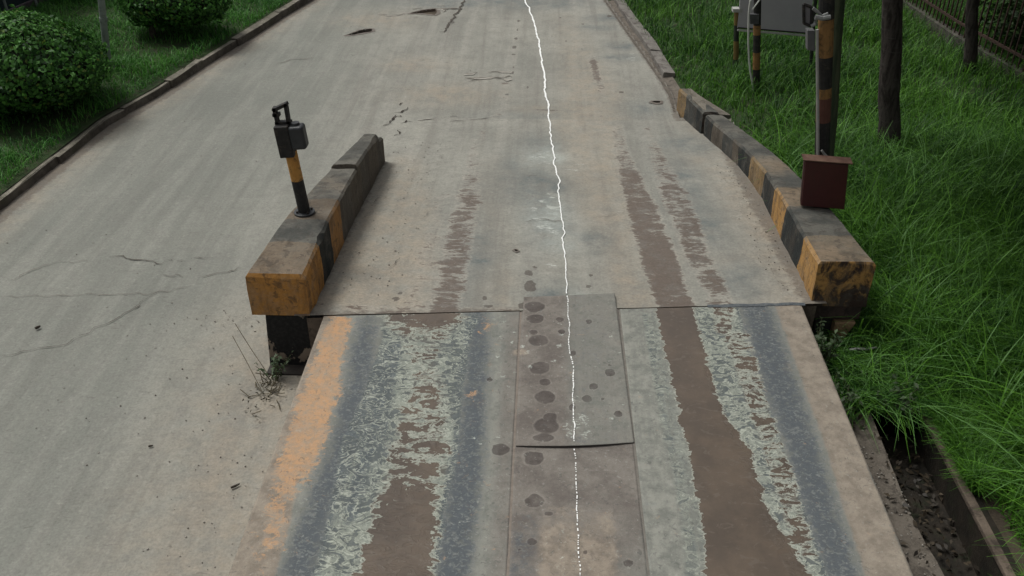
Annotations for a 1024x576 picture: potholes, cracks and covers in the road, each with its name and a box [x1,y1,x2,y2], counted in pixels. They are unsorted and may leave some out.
crack [383,89,491,136]
pothole [408,8,440,16]
crack [463,71,512,81]
crack [379,0,465,32]
pothole [343,28,375,36]
crack [2,255,237,356]
